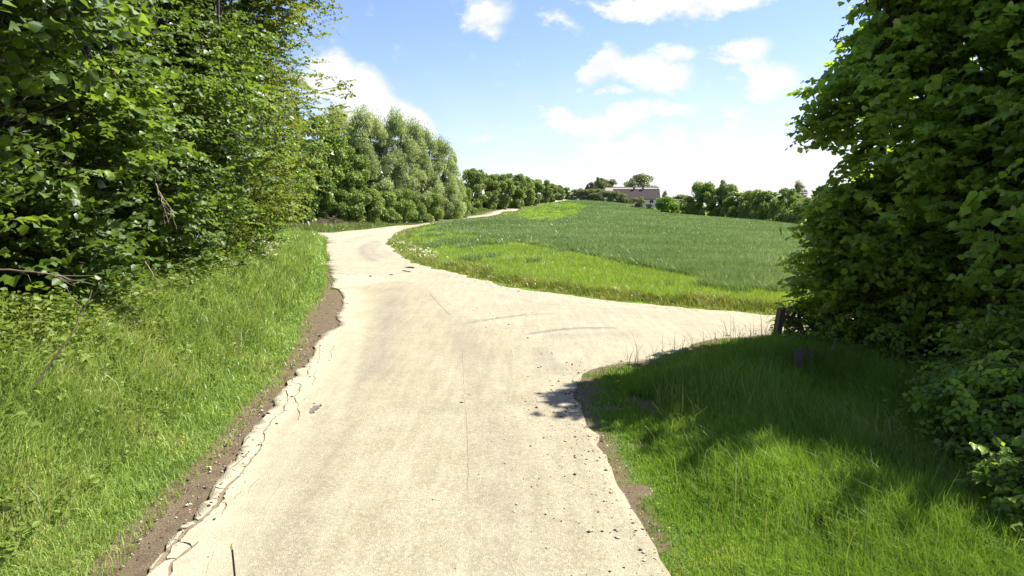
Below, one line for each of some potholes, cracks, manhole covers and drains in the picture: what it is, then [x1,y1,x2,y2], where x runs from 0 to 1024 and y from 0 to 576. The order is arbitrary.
crack [462,353,470,490]
crack [147,346,334,576]
